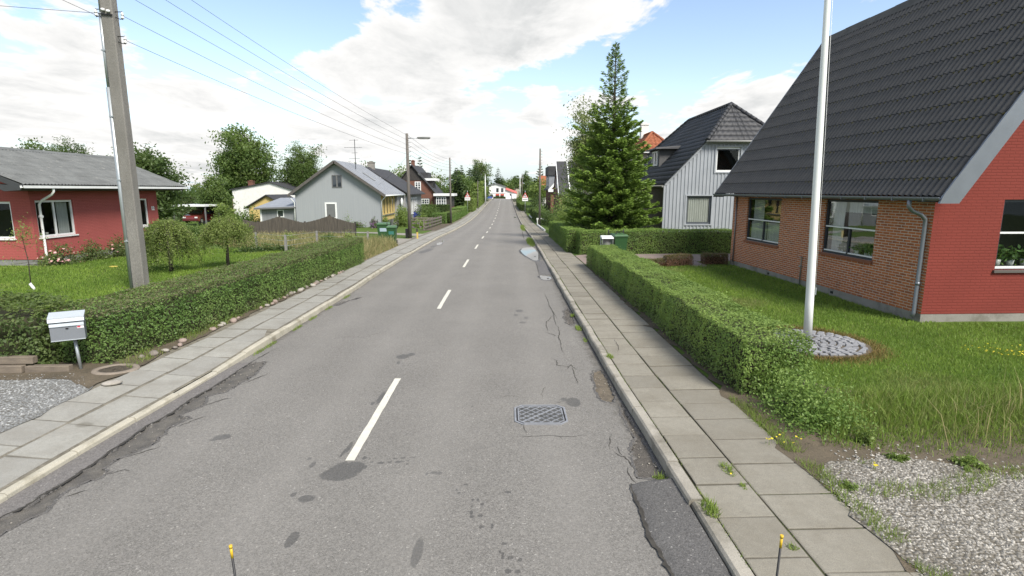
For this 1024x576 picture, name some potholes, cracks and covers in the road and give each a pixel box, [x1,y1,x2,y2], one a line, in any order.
pothole [590,369,618,404]
crack [609,434,674,576]
crack [545,297,578,383]
